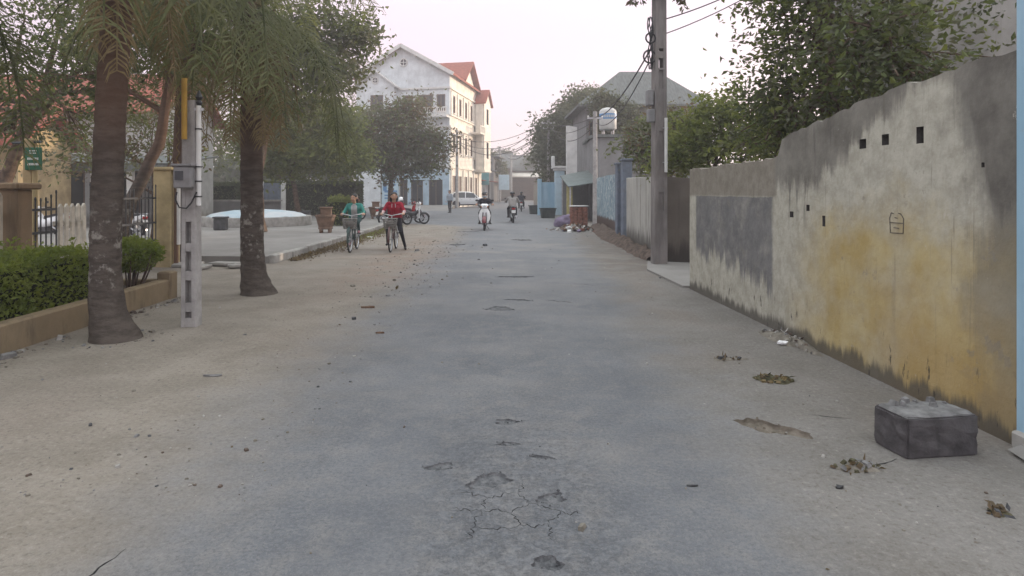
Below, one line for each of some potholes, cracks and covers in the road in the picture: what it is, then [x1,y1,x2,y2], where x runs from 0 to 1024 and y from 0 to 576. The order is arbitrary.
crack [89,549,125,576]
pothole [464,471,514,489]
crack [456,483,578,540]
pothole [535,489,567,506]
pothole [734,417,813,439]
pothole [531,555,565,571]
pothole [422,462,453,471]
